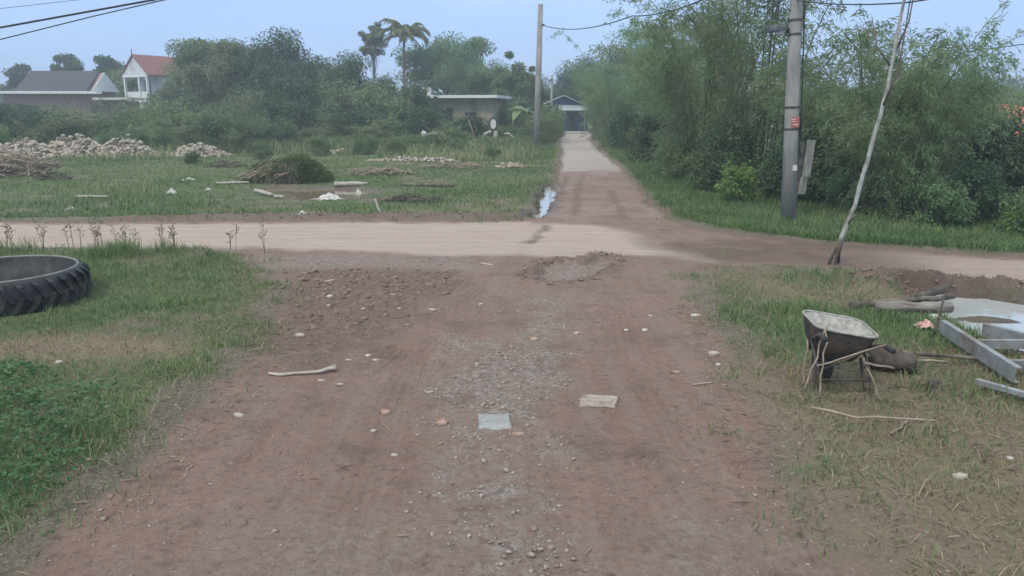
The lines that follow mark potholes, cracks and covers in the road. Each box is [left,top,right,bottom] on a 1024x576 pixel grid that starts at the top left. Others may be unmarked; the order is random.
pothole [524,182,562,218]
